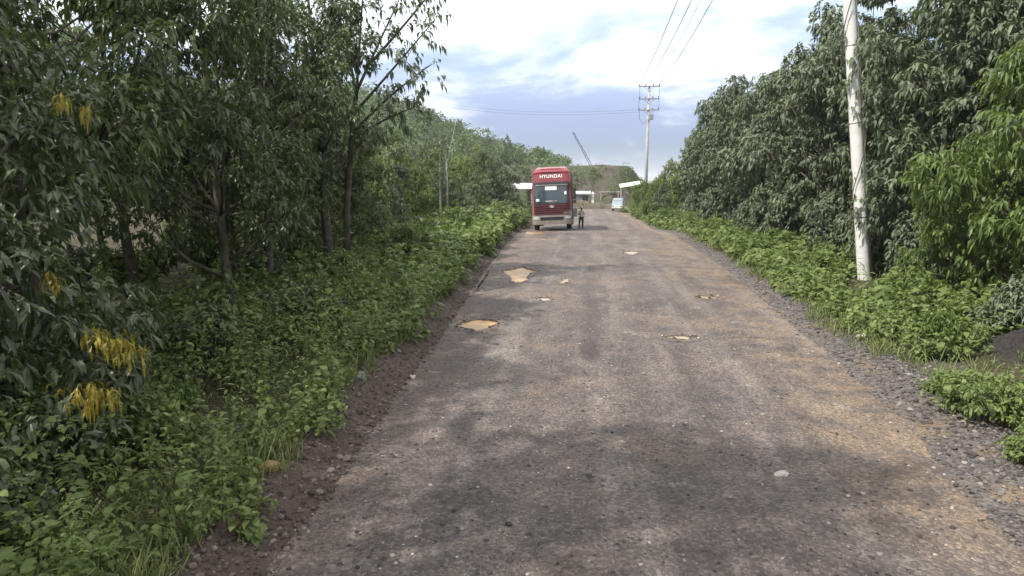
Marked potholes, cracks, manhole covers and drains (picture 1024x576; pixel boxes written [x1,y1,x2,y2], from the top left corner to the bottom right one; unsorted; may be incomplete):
pothole [497,265,540,284]
pothole [653,332,704,342]
pothole [447,317,509,333]
